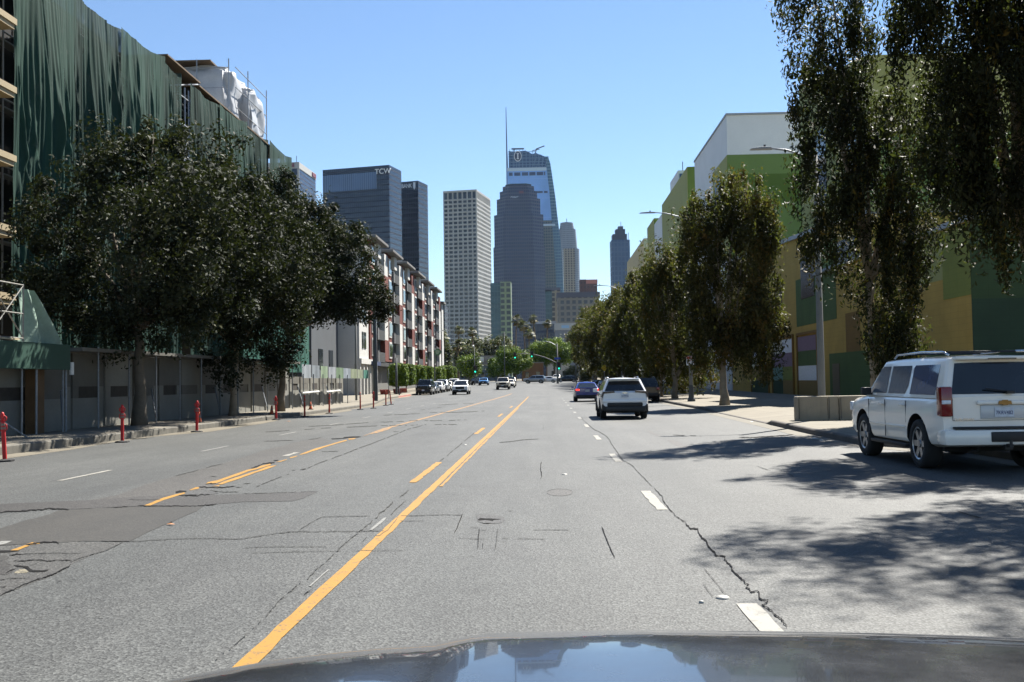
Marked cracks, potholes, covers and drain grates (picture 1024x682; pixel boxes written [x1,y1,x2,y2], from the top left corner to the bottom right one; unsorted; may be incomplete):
pothole [476,514,505,524]
crack [655,489,787,626]
